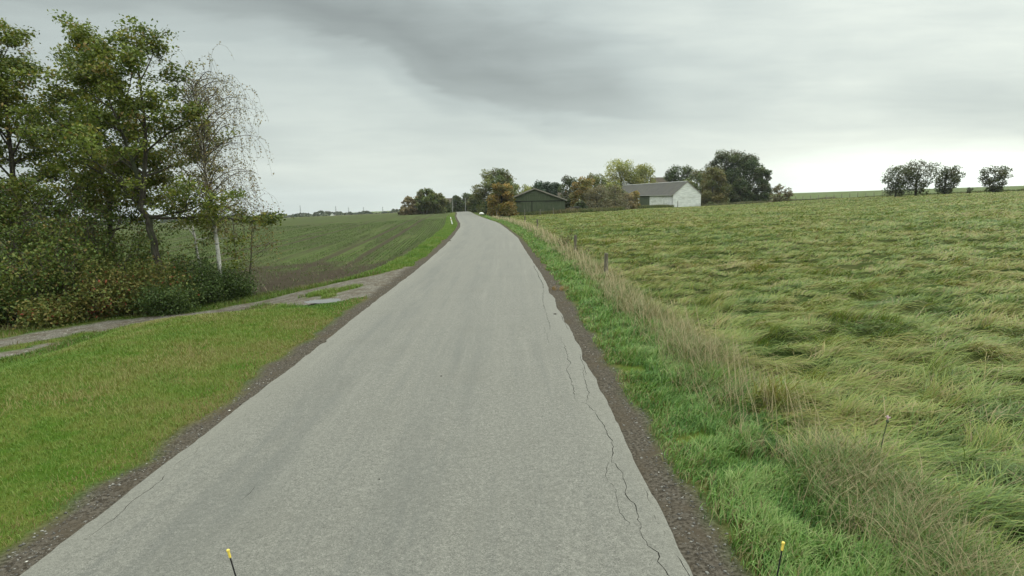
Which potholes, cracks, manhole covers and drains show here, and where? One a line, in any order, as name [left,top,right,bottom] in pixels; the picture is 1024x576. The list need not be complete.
crack [535,269,690,576]
